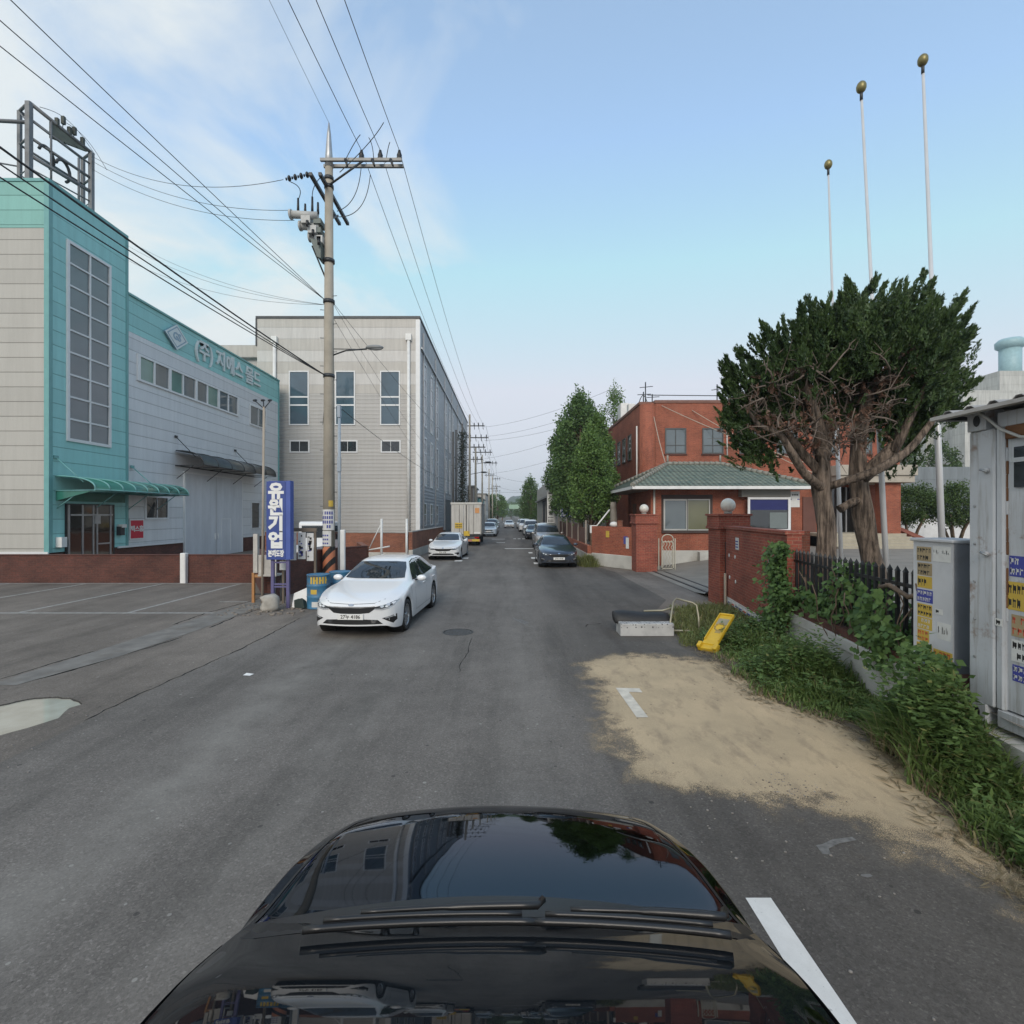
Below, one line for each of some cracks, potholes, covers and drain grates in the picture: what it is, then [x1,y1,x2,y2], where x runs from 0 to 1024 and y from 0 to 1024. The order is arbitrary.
manhole cover [443,628,474,636]
crack [84,618,300,721]
